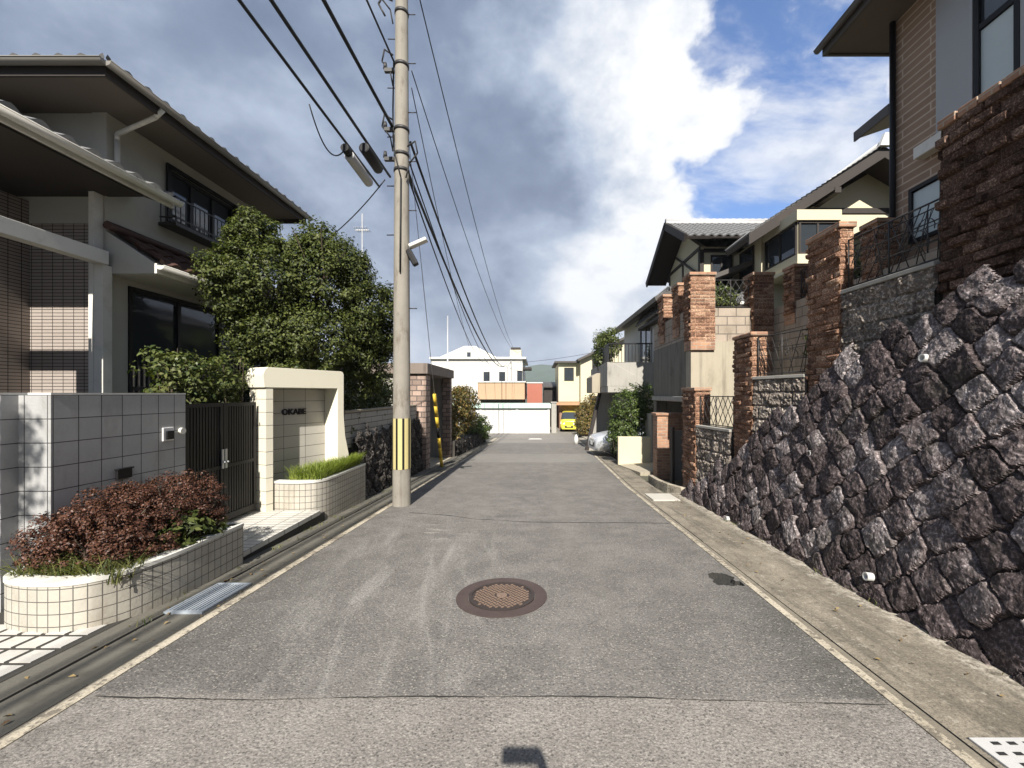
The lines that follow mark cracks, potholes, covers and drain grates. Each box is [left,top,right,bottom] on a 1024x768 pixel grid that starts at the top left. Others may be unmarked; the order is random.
drain grate [163,583,252,614]
manhole cover [456,578,547,618]
